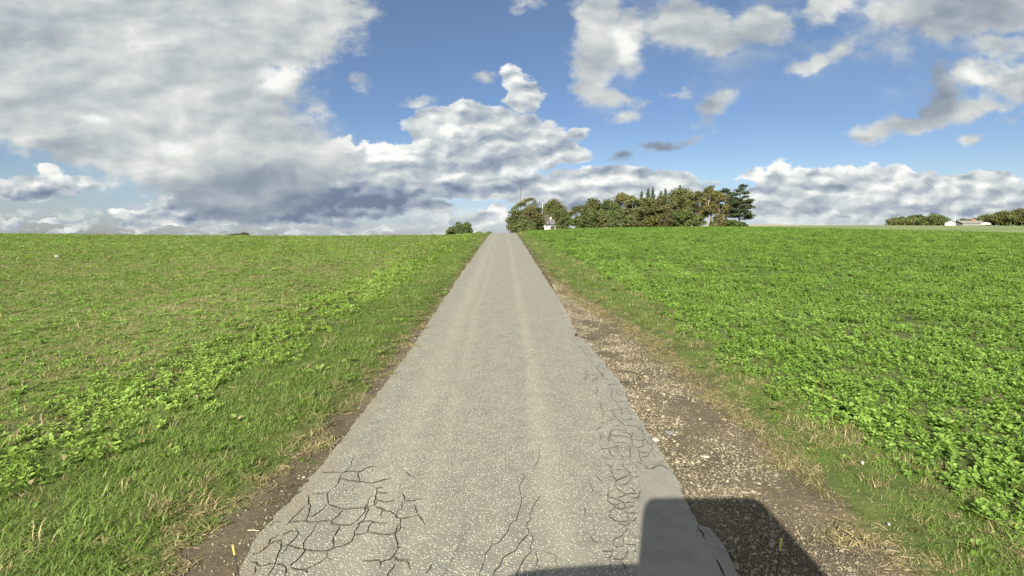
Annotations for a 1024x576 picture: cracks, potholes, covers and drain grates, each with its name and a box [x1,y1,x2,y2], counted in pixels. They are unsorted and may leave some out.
crack [480,453,558,576]
crack [571,338,671,569]
crack [254,459,432,576]
